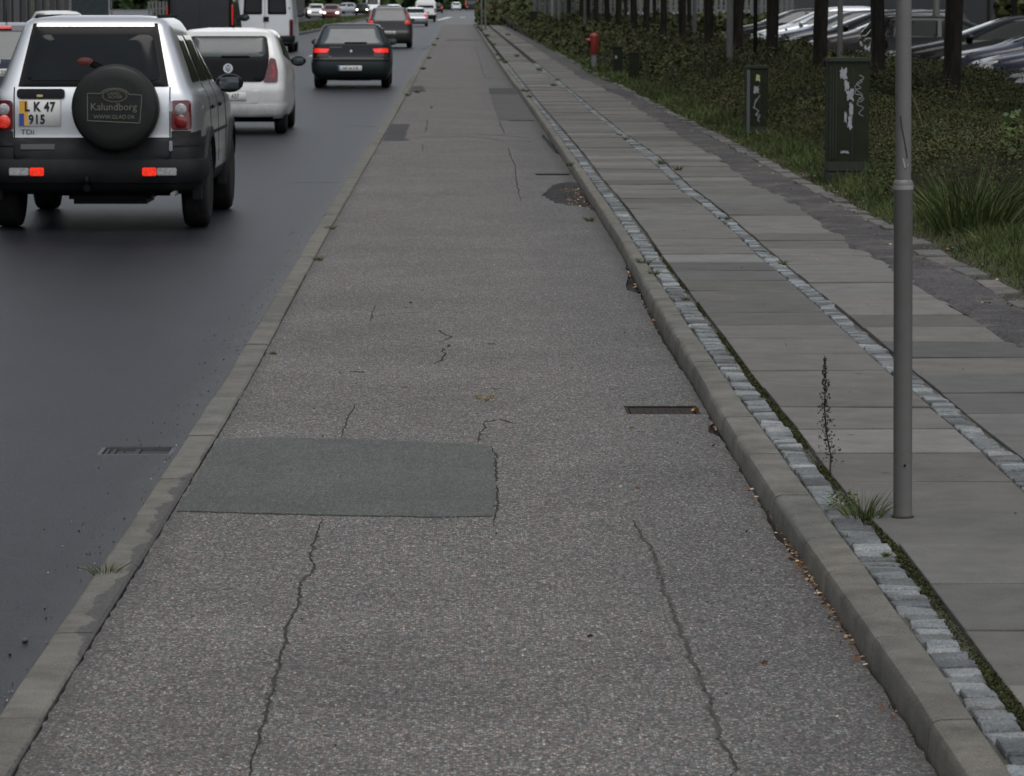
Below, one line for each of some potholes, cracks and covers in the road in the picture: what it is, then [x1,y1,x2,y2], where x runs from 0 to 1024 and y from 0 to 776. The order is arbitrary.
crack [431,330,453,365]
drain grate [96,446,177,455]
crack [248,519,323,776]
crack [477,419,518,526]
crack [633,520,740,776]
crack [340,403,356,438]
pothole [541,182,595,211]
crack [499,121,521,202]
